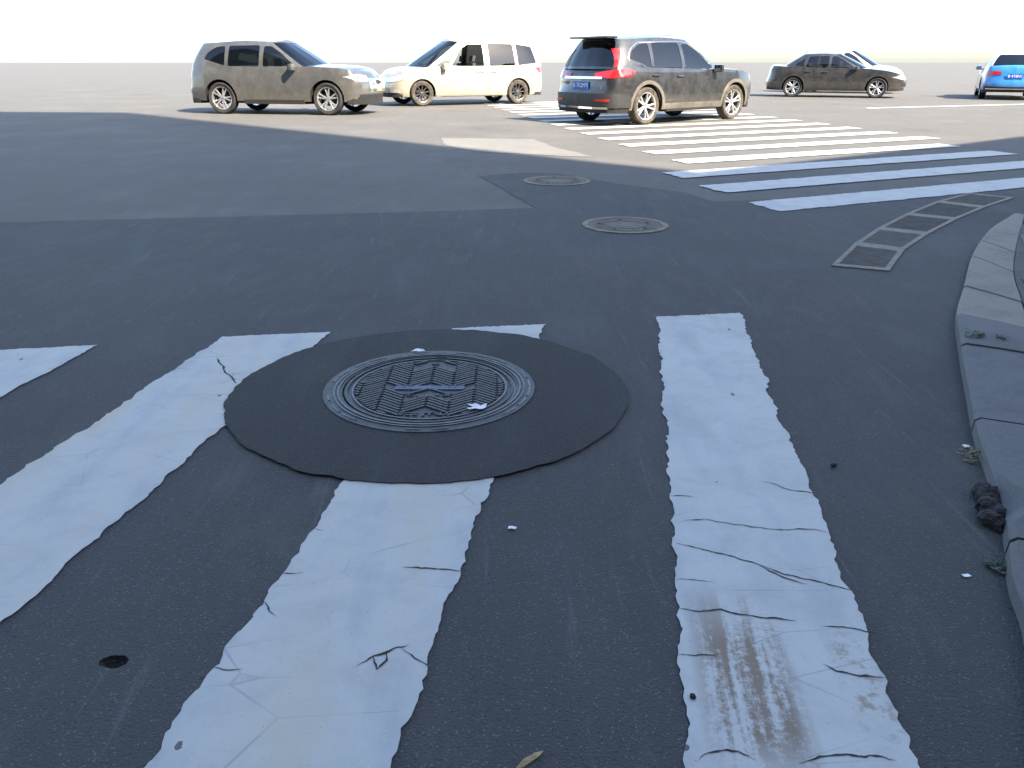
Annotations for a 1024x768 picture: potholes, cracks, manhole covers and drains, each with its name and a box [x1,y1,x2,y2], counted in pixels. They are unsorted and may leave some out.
manhole cover [582,217,669,234]
crack [826,665,886,678]
manhole cover [323,351,535,433]
crack [693,519,825,532]
manhole cover [523,176,591,186]
crack [357,645,433,670]
crack [699,749,752,760]
crack [801,753,893,763]
crack [678,543,855,591]
pothole [99,655,129,669]
crack [676,607,796,621]
